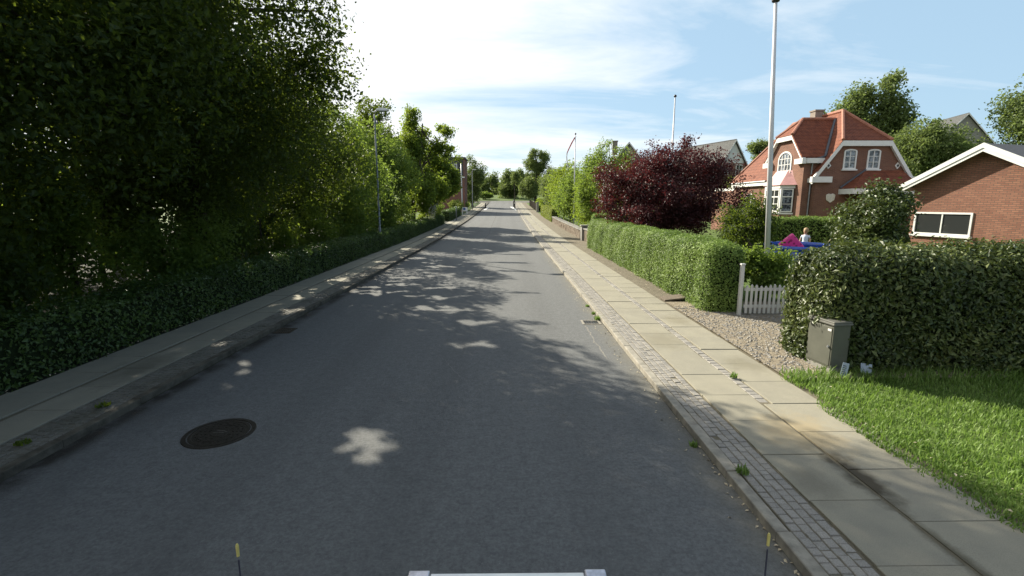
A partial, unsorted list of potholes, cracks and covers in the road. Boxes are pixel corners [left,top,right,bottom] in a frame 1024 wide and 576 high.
manhole cover [180,418,257,449]
